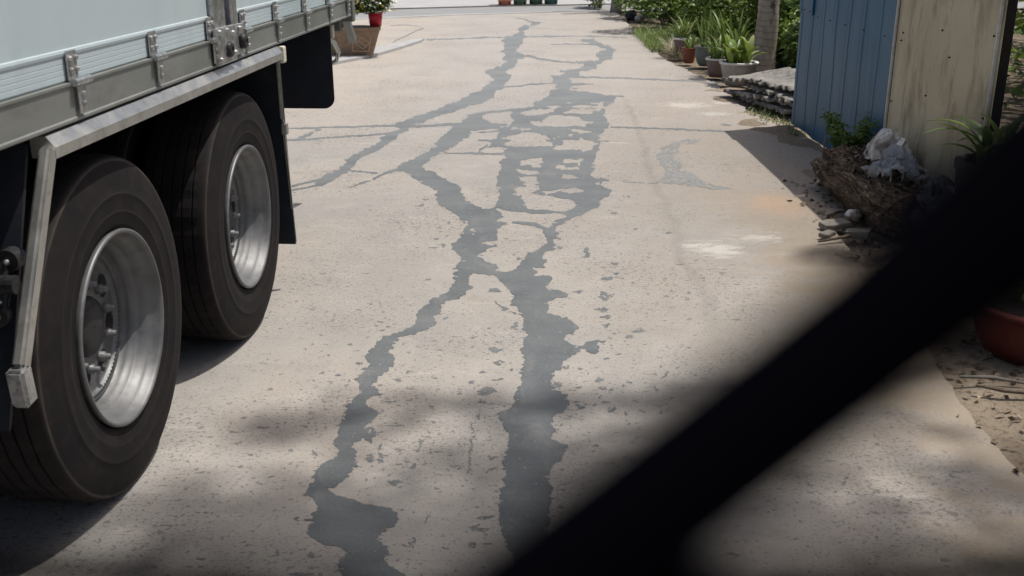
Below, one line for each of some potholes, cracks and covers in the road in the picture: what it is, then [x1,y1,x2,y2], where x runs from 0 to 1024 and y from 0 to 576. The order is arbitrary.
crack [287,18,732,576]
